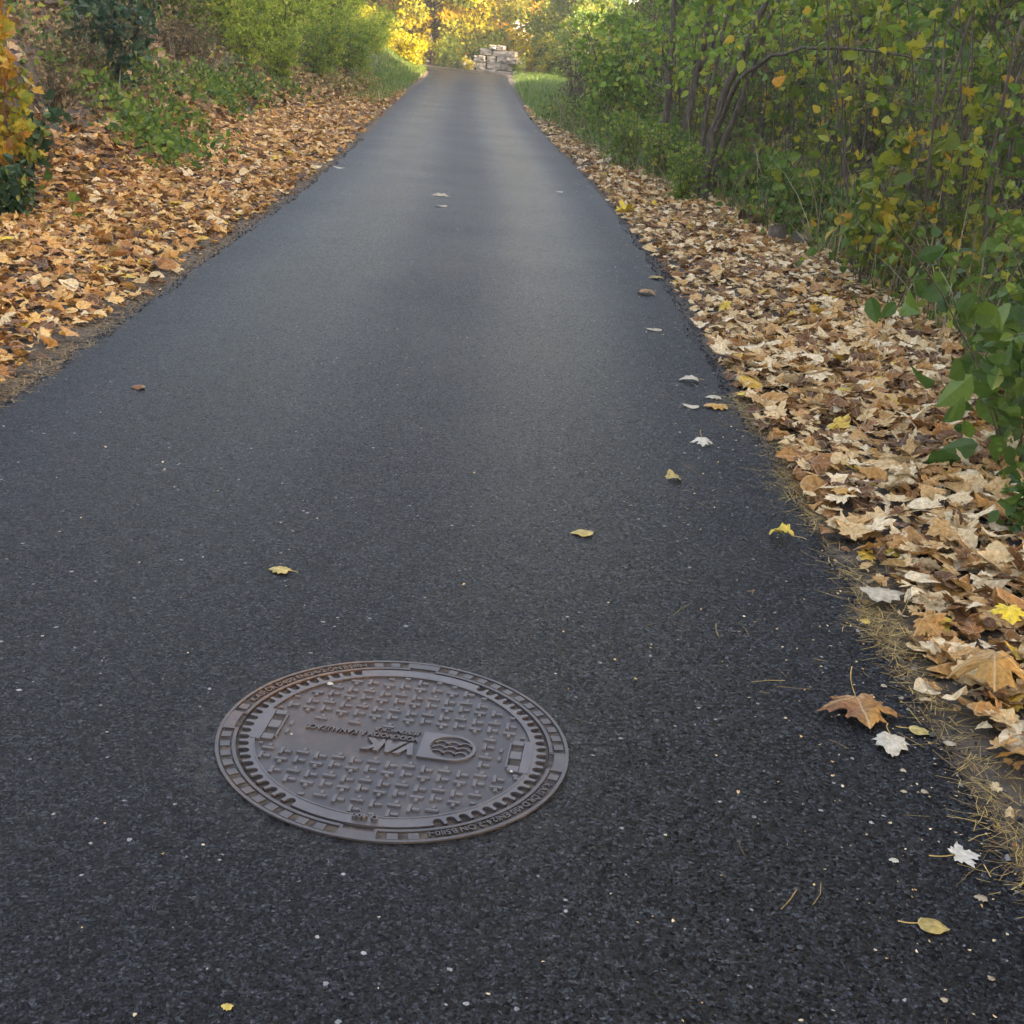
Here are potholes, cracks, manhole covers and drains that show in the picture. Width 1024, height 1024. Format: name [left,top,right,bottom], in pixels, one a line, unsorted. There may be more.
manhole cover [215,660,569,844]
